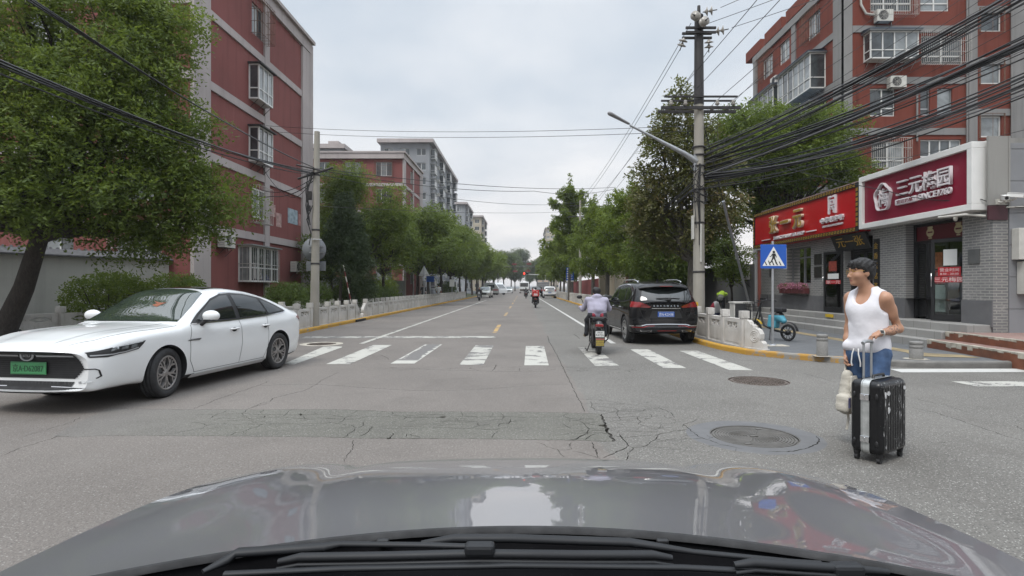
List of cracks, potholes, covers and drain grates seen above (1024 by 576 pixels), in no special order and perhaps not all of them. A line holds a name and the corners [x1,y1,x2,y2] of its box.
manhole cover [686,421,828,455]
crack [56,357,834,461]
manhole cover [728,376,790,386]
